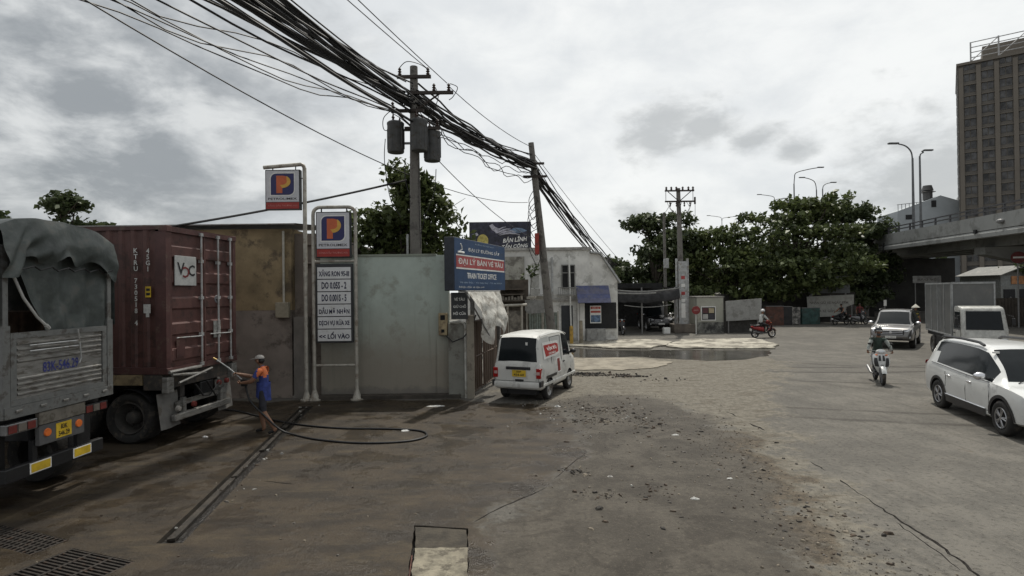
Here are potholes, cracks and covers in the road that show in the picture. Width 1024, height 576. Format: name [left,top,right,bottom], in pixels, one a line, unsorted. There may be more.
drain grate [0,524,68,555]
manhole cover [408,525,469,576]
crack [810,461,980,576]
drain grate [5,548,135,576]
